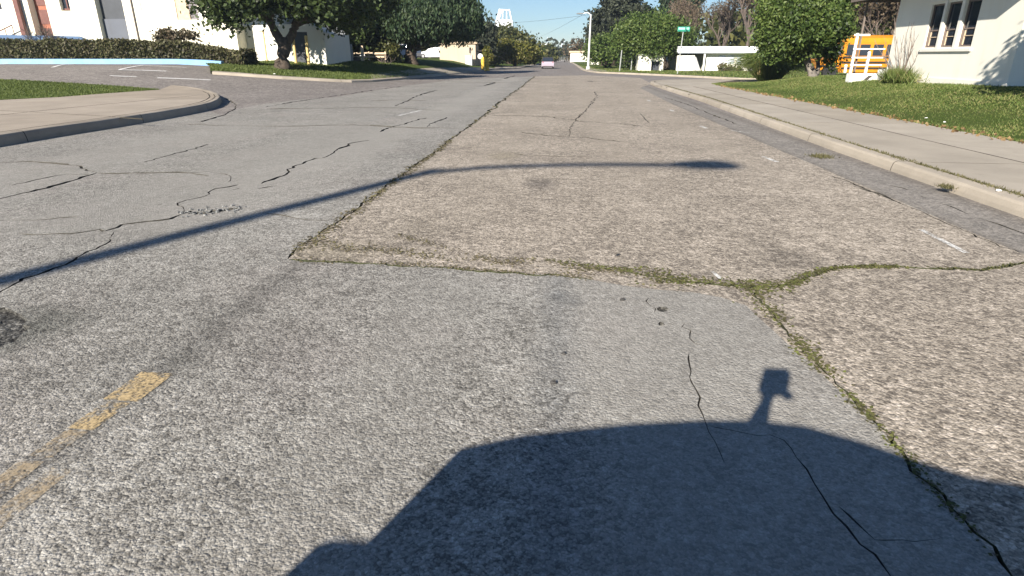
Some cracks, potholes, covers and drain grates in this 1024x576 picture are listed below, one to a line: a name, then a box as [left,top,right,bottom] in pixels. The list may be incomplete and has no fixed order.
crack [629,176,1024,576]
crack [190,86,447,189]
crack [494,81,649,157]
crack [0,144,333,292]
